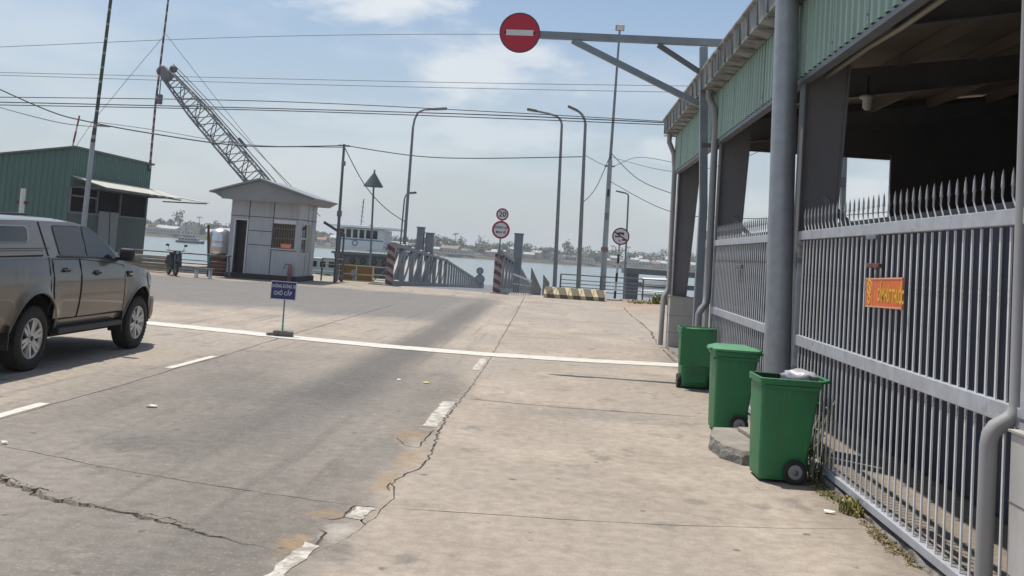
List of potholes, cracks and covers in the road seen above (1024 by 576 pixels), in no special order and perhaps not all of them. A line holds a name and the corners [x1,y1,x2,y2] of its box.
crack [624,307,677,362]
crack [0,296,525,556]
